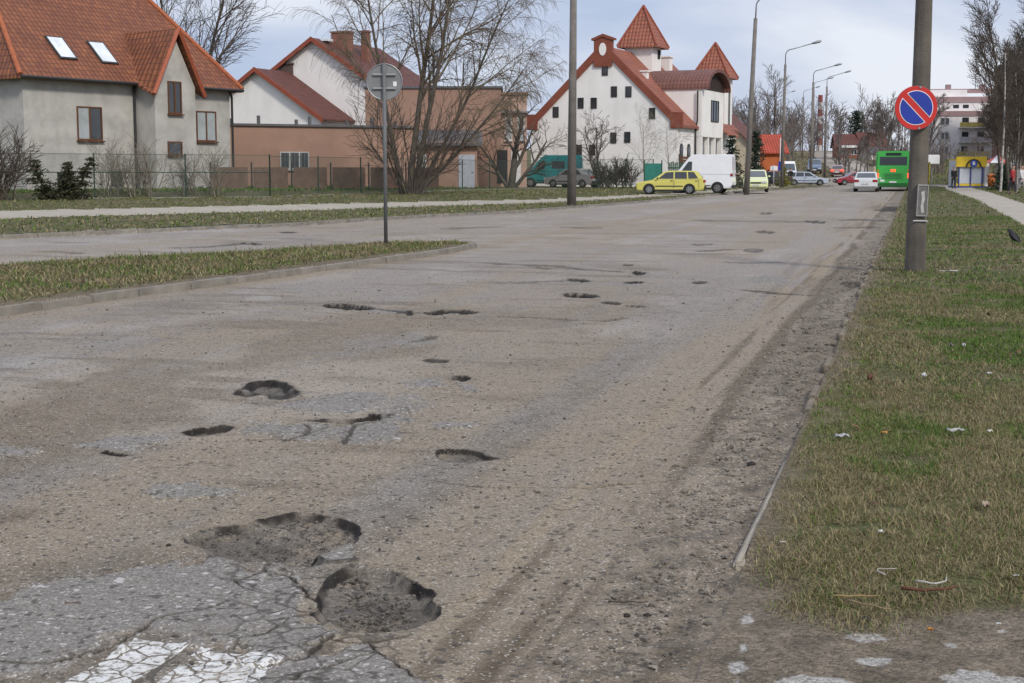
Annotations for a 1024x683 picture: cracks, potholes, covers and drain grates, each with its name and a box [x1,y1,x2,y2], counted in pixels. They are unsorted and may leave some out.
pothole [436,449,497,463]
crack [248,413,394,444]
pothole [311,562,441,633]
pothole [322,303,374,311]
crack [0,563,319,665]
crack [291,634,426,681]
pothole [182,512,363,567]
pothole [234,380,301,400]
pothole [183,425,235,437]
